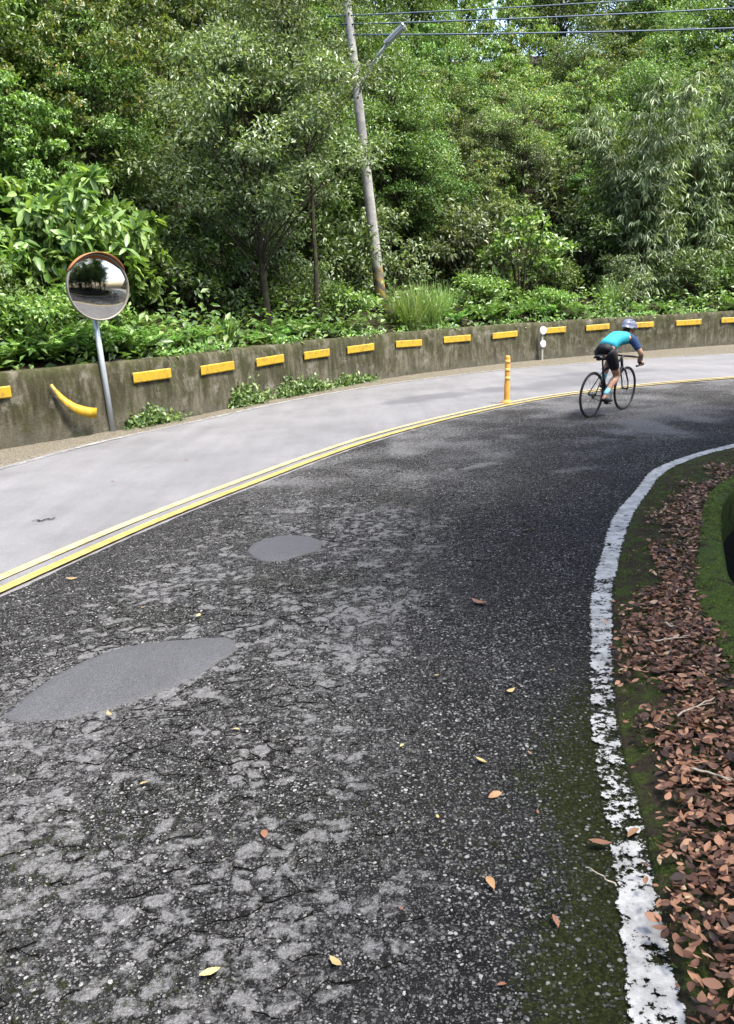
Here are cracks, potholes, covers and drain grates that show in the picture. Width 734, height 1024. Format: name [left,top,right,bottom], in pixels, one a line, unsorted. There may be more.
crack [0,459,507,1024]
